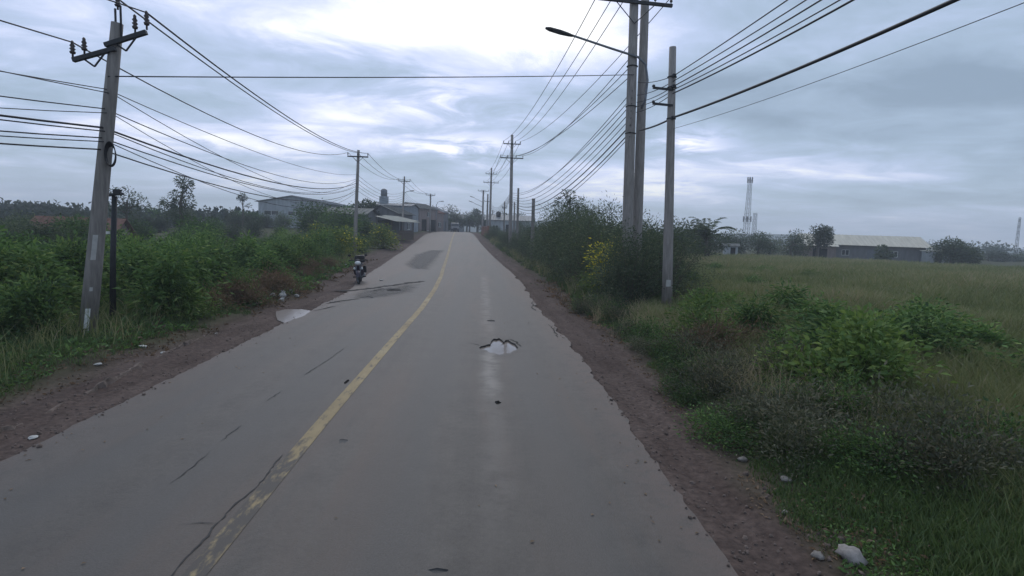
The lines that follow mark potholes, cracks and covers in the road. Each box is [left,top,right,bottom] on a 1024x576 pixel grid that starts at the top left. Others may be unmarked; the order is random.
crack [171,454,283,576]
pothole [479,338,518,355]
